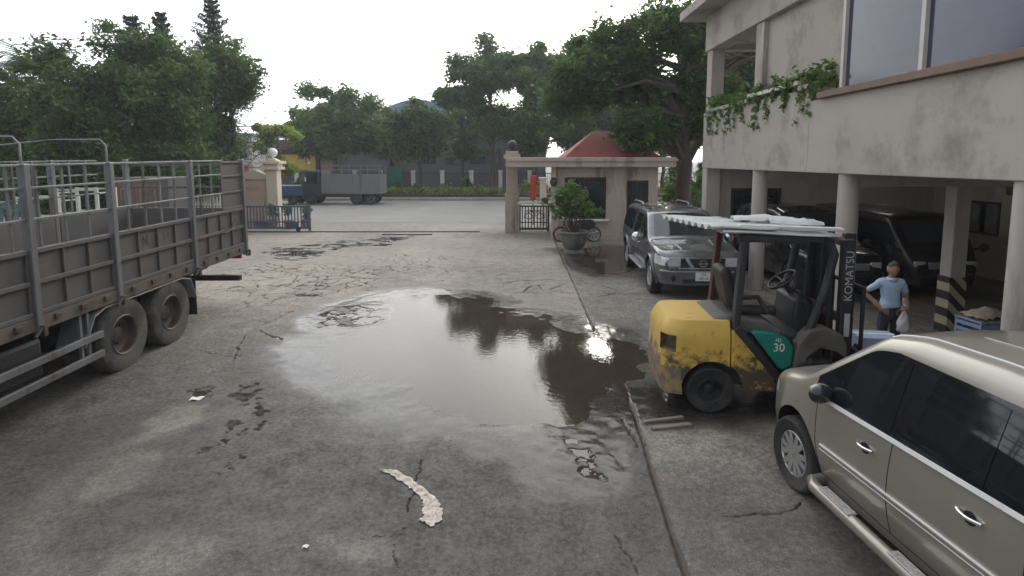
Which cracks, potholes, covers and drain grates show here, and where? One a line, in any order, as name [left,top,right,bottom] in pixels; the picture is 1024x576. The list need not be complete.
pothole [296,302,396,333]
crack [339,452,438,576]
crack [177,242,666,365]
pothole [550,427,625,492]
pothole [260,246,331,261]
crack [703,492,822,529]
